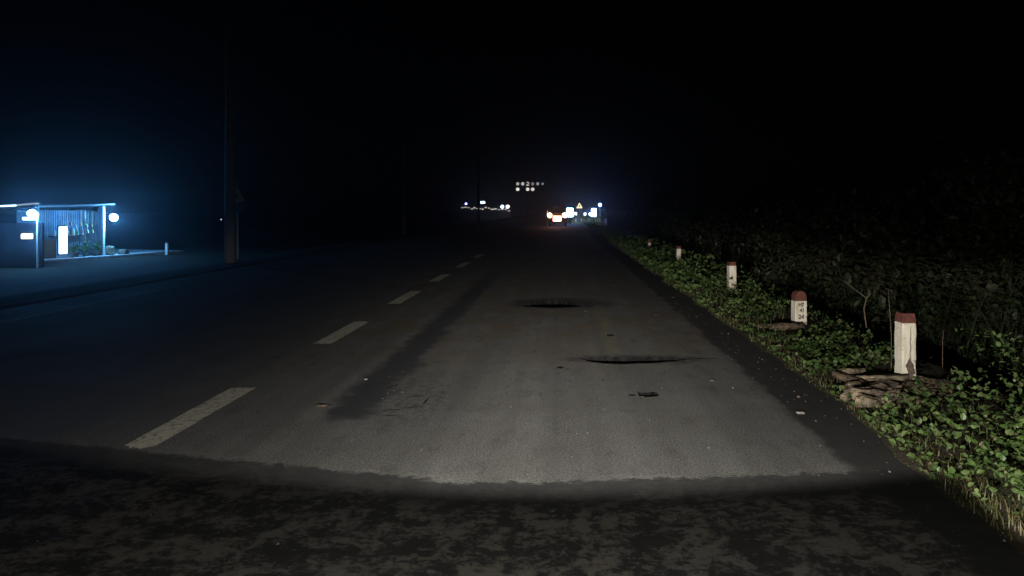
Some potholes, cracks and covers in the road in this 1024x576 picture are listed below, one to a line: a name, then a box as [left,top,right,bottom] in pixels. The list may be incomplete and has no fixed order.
crack [319,383,428,416]
pothole [523,300,581,308]
